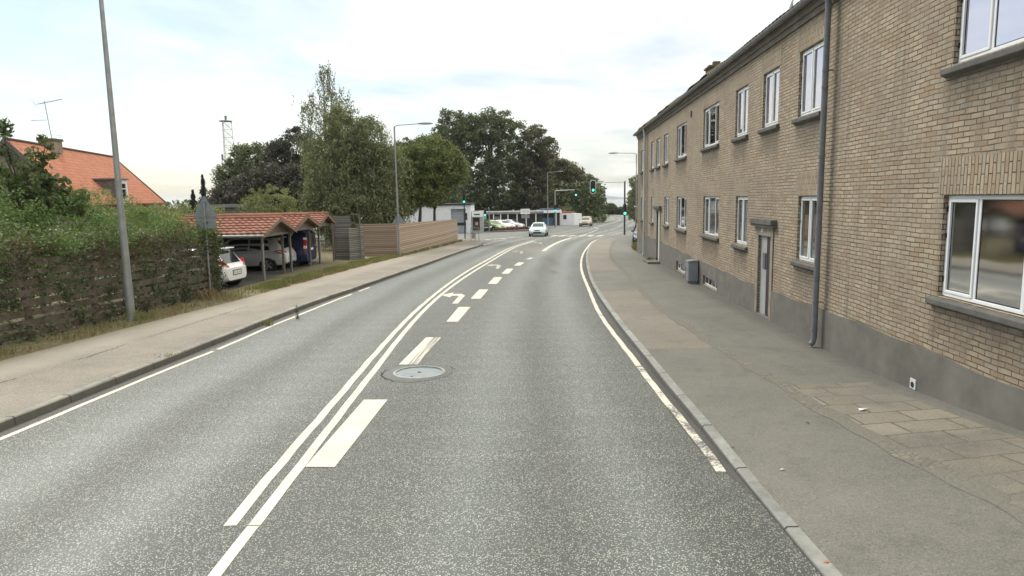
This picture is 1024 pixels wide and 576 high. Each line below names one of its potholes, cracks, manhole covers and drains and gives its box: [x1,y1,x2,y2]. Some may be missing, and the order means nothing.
manhole cover [384,365,454,382]
